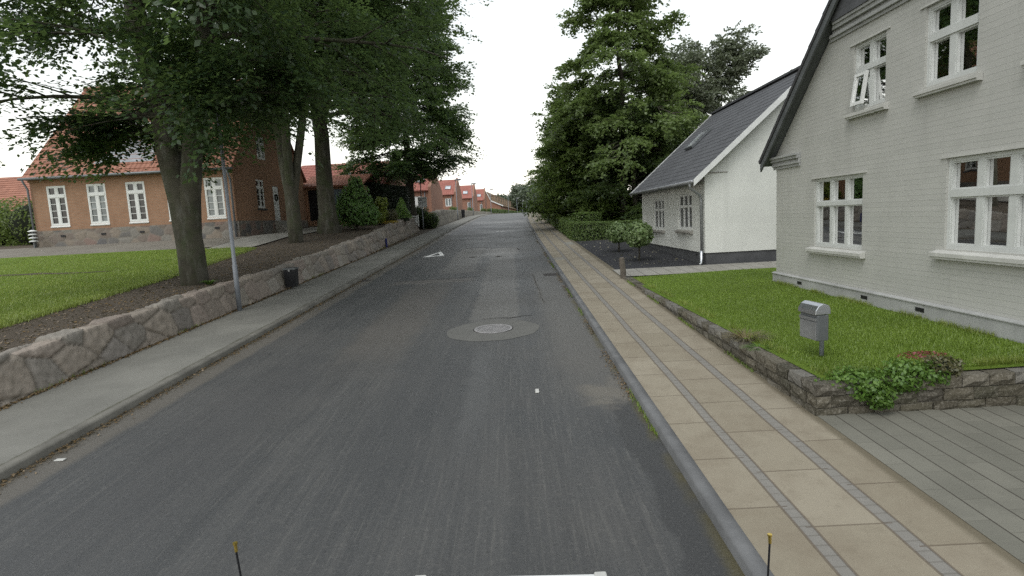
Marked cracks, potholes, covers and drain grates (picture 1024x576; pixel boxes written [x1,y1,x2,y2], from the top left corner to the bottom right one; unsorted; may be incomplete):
manhole cover [473,324,513,334]
